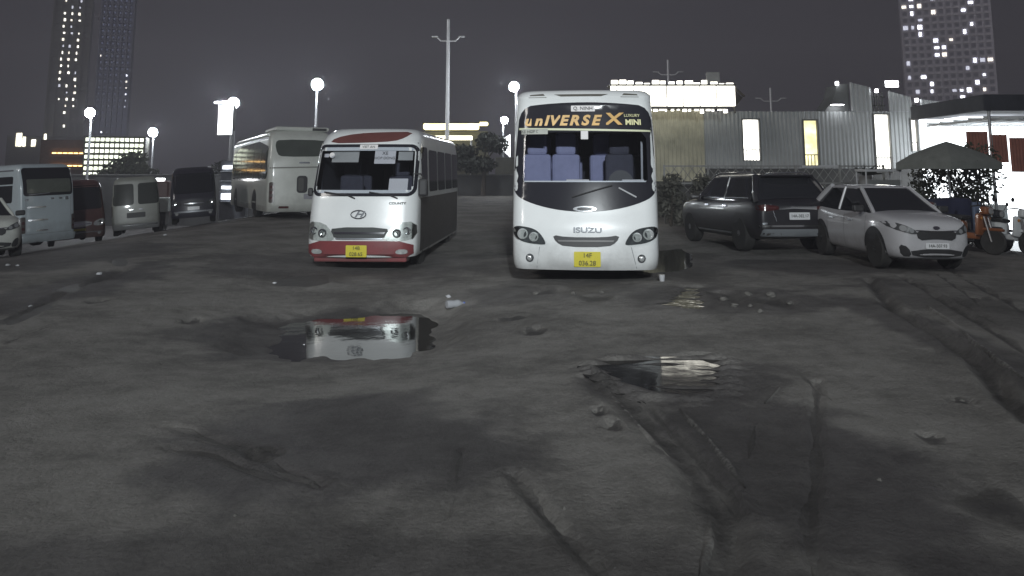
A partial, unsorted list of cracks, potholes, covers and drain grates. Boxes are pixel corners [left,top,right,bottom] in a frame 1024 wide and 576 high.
crack [798,370,833,401]
